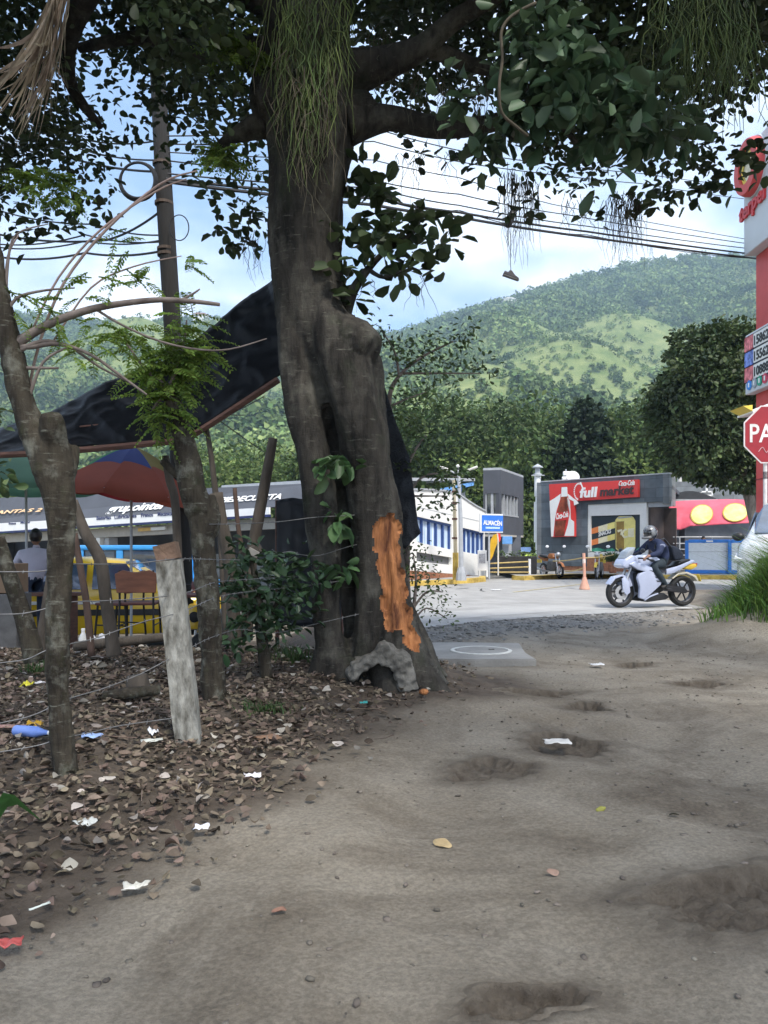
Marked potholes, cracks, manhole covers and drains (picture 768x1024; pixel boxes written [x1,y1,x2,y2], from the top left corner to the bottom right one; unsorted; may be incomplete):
pothole [437,755,547,784]
manhole cover [450,646,512,655]
pothole [599,856,768,947]
pothole [662,680,731,690]
pothole [557,700,617,714]
pothole [448,982,603,1024]
pothole [516,729,619,761]
